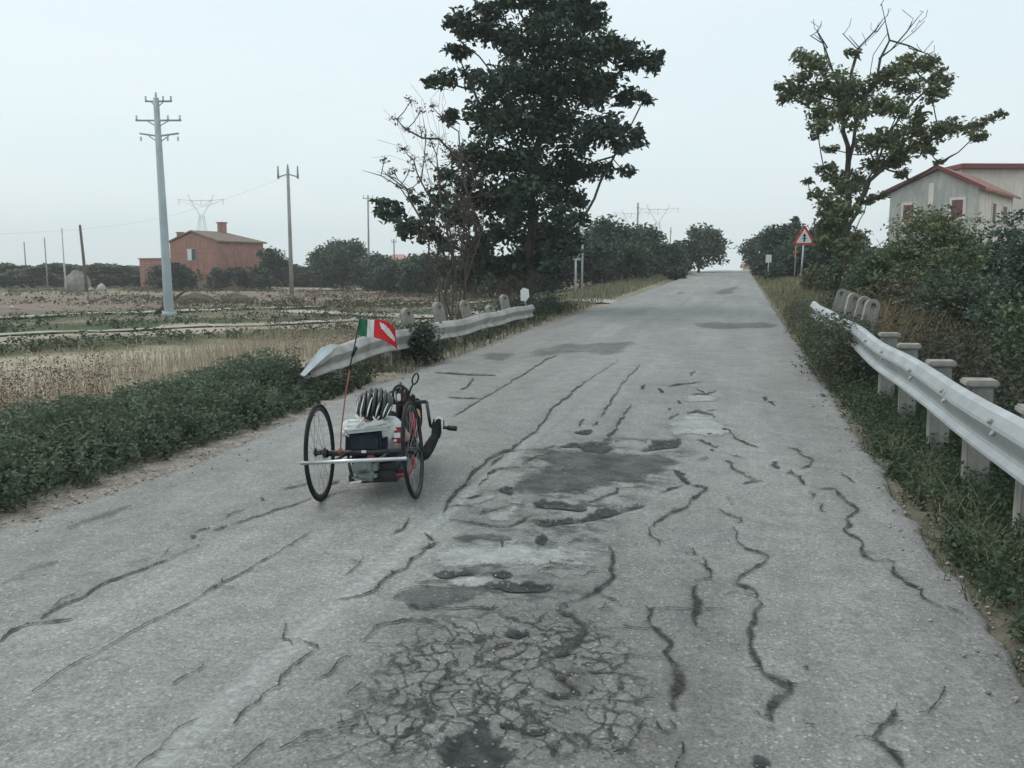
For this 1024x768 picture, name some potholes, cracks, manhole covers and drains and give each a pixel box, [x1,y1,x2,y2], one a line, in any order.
crack [452,445,556,547]
crack [648,371,815,725]
crack [787,447,963,612]
pothole [433,570,474,578]
crack [0,483,310,641]
crack [855,686,946,768]
pothole [486,580,552,592]
crack [579,364,640,437]
crack [436,372,491,399]
crack [232,518,713,768]
